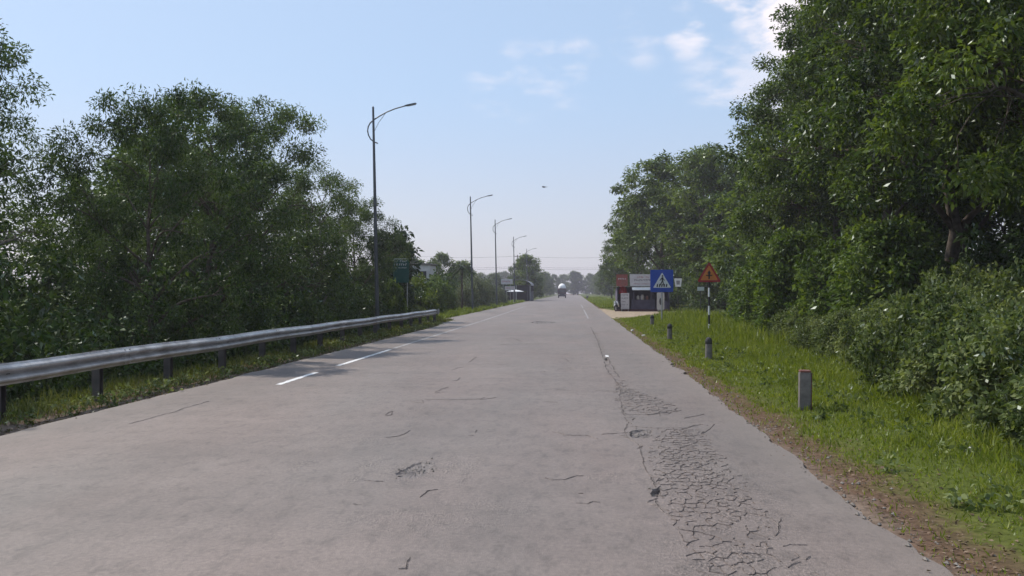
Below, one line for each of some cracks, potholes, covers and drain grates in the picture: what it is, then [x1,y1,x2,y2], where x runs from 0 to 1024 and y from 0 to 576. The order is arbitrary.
crack [544,475,597,504]
crack [413,357,496,403]
pothole [628,430,652,438]
crack [130,401,208,424]
crack [555,327,819,576]
pothole [396,457,434,479]
